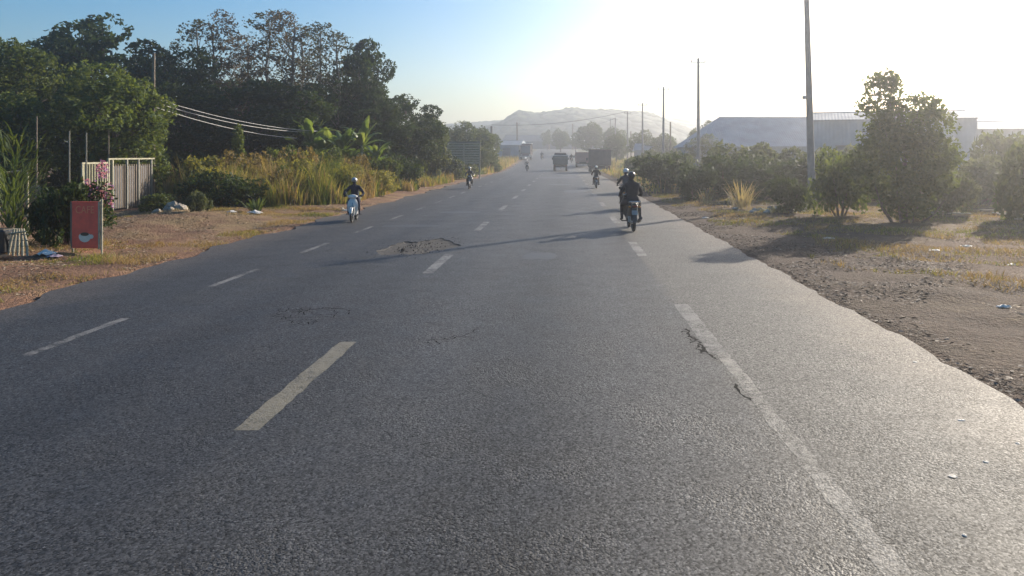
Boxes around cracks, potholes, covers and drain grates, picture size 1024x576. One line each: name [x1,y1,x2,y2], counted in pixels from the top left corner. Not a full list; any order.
crack [681,329,751,400]
pothole [363,236,464,258]
crack [272,307,350,325]
